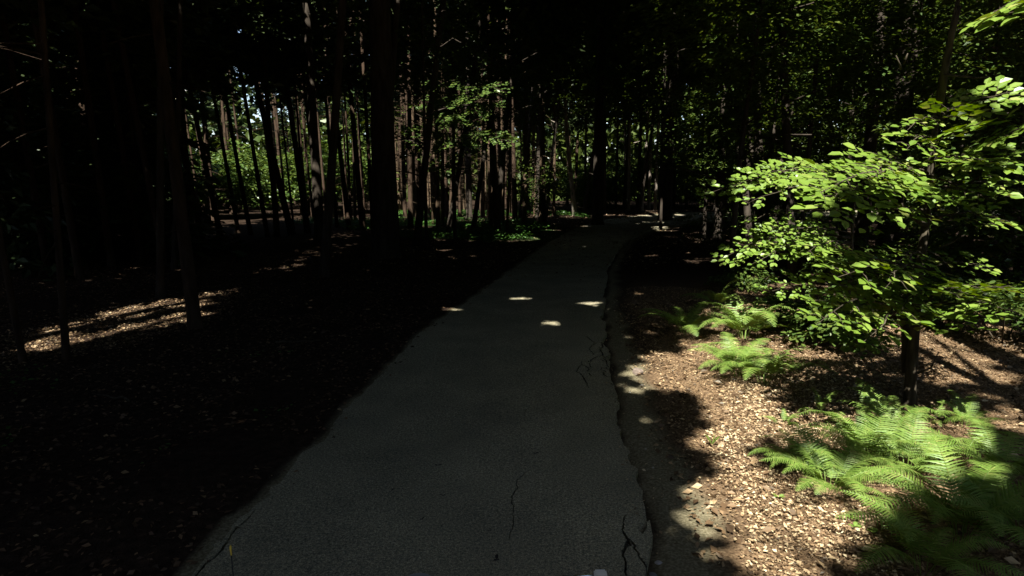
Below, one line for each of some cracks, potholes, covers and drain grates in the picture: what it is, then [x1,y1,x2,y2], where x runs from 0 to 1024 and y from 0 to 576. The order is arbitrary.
crack [576,338,613,385]
crack [621,515,647,576]
